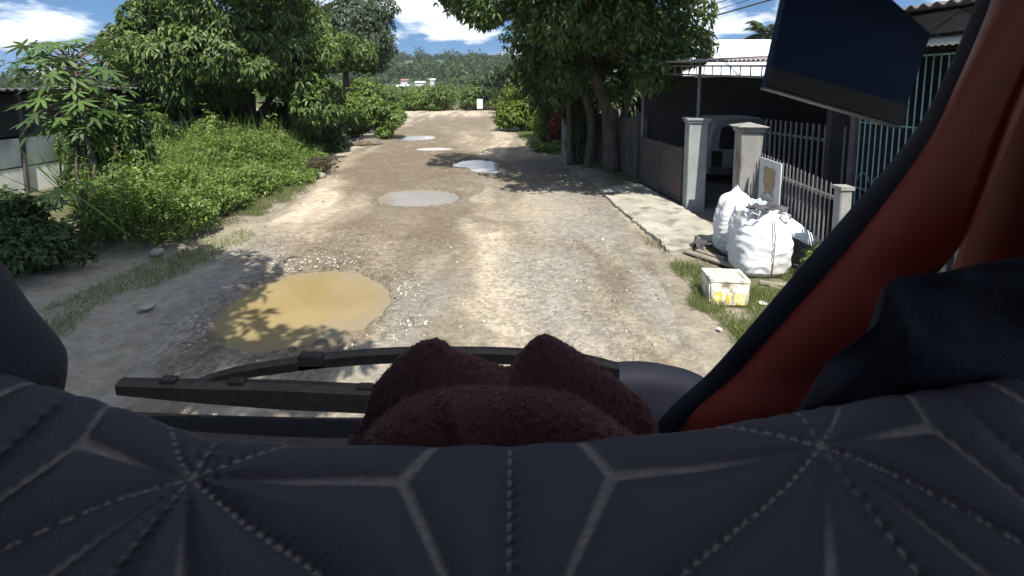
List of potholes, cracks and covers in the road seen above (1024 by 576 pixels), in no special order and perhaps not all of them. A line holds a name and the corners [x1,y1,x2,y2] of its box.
pothole [192,262,407,365]
pothole [448,157,511,174]
pothole [371,187,466,208]
